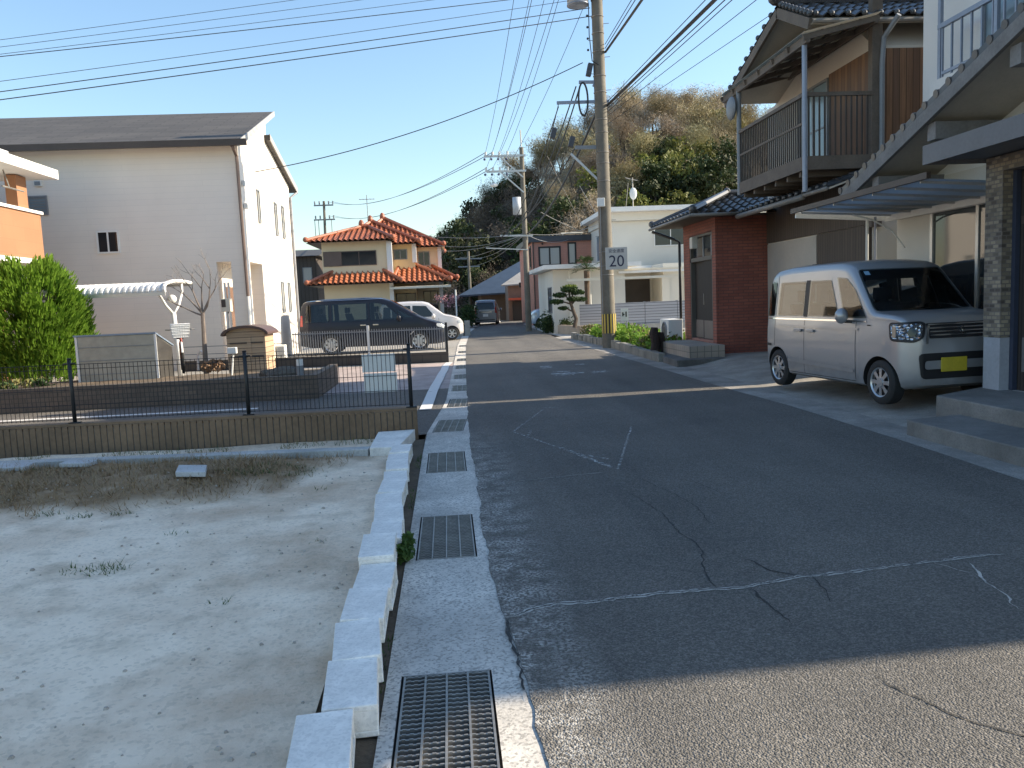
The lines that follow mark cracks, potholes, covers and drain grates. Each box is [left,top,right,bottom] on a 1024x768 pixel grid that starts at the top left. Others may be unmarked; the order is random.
drain grate [448,398,468,407]
drain grate [427,451,466,473]
drain grate [433,419,467,433]
drain grate [417,514,476,561]
crack [878,676,1024,736]
drain grate [393,669,500,768]
crack [505,494,1018,697]
